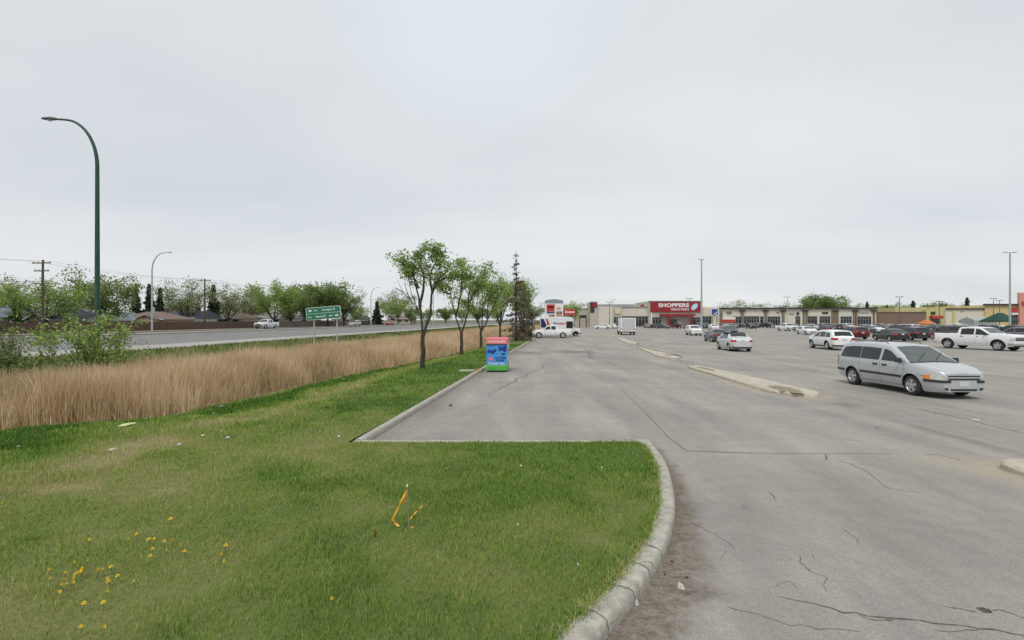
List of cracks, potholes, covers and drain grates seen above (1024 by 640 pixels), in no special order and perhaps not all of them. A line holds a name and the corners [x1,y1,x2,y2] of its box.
crack [726,556,1024,636]
crack [905,406,1017,432]
